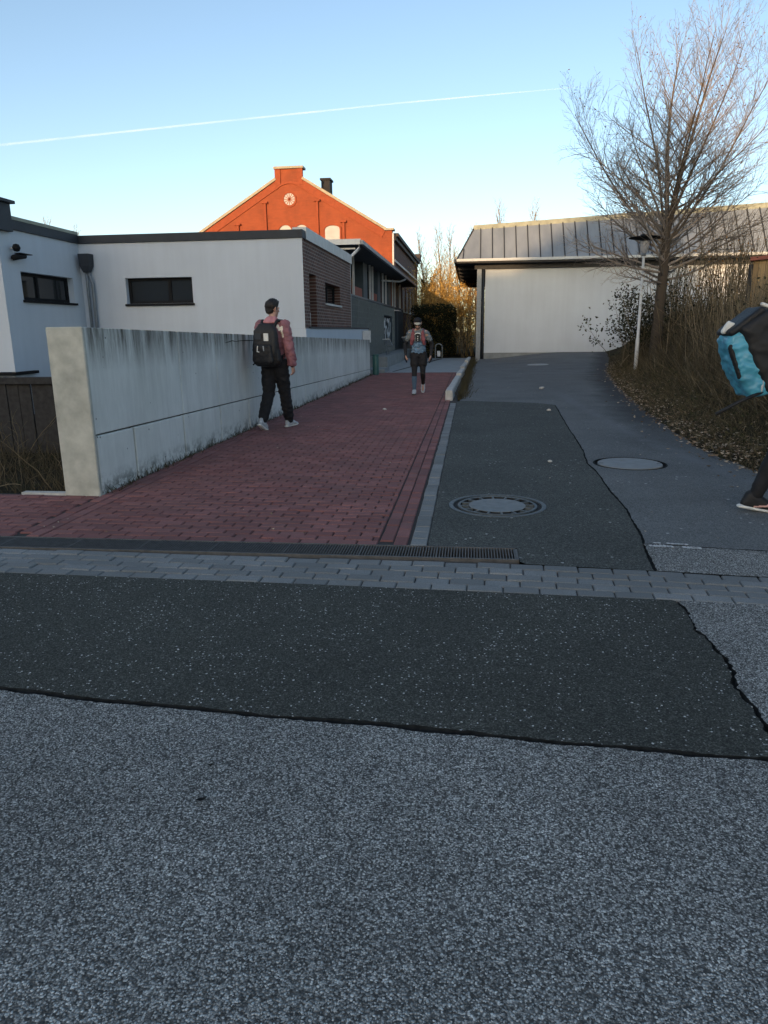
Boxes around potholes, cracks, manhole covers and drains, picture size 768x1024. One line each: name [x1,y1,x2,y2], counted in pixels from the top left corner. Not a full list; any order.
drain grate [0,536,519,564]
manhole cover [449,494,546,518]
manhole cover [593,457,668,470]
